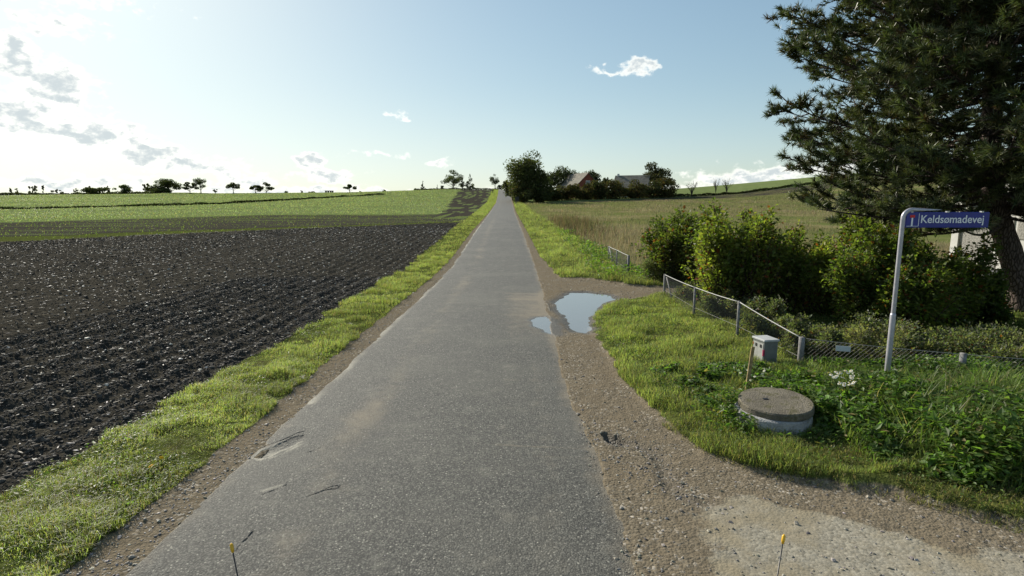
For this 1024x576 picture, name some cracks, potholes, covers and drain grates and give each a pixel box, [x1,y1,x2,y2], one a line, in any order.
pothole [254,435,305,459]
manhole cover [738,387,815,422]
pothole [601,431,628,446]
